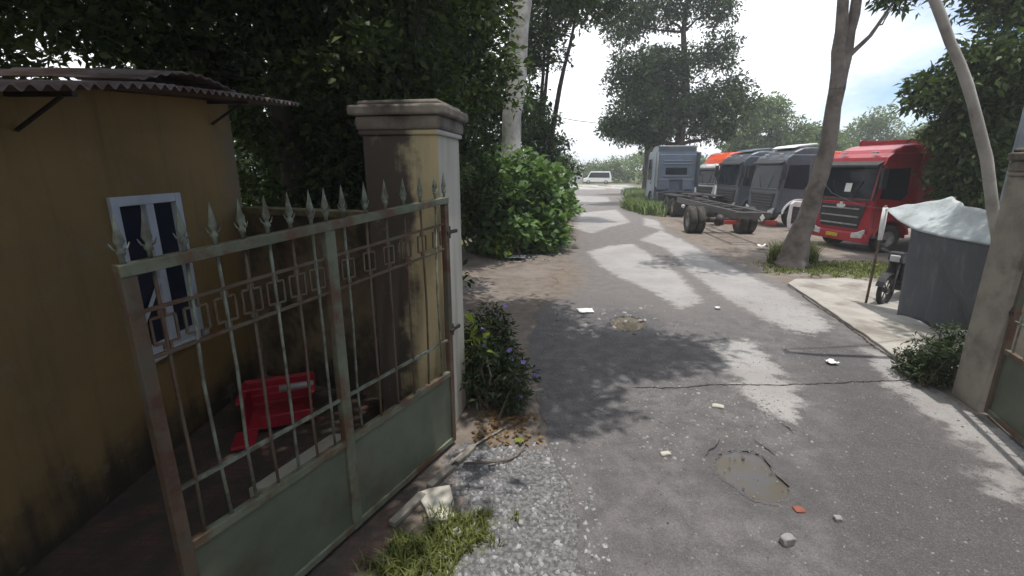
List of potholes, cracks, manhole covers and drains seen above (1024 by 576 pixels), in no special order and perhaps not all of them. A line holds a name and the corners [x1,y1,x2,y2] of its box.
pothole [709,447,797,506]
crack [637,379,913,389]
pothole [607,315,648,332]
